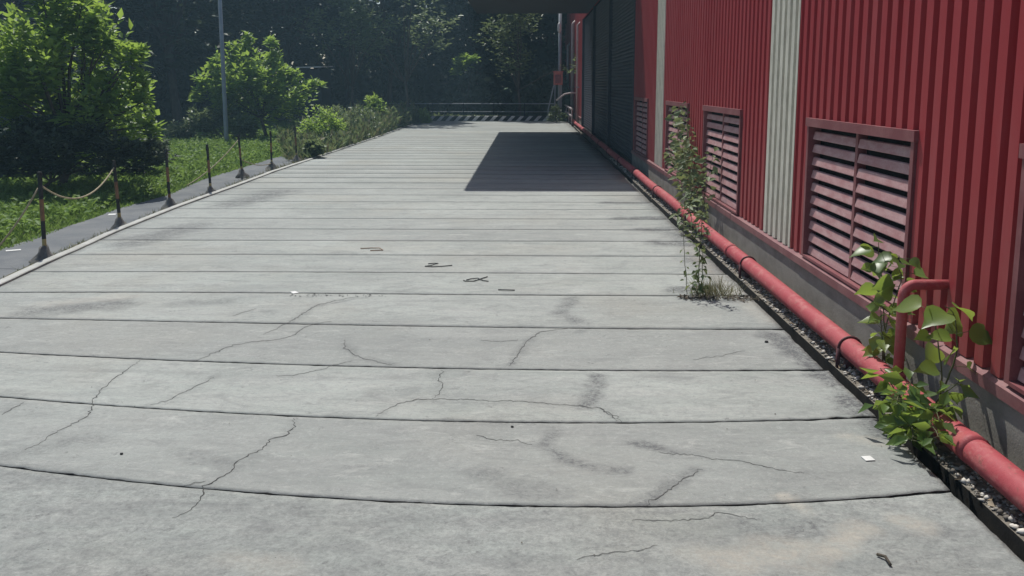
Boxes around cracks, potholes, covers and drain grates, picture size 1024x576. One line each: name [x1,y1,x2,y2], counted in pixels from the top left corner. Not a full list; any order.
crack [635,452,802,521]
crack [26,364,134,449]
crack [377,371,622,422]
crack [200,297,353,359]
crack [172,420,296,518]
